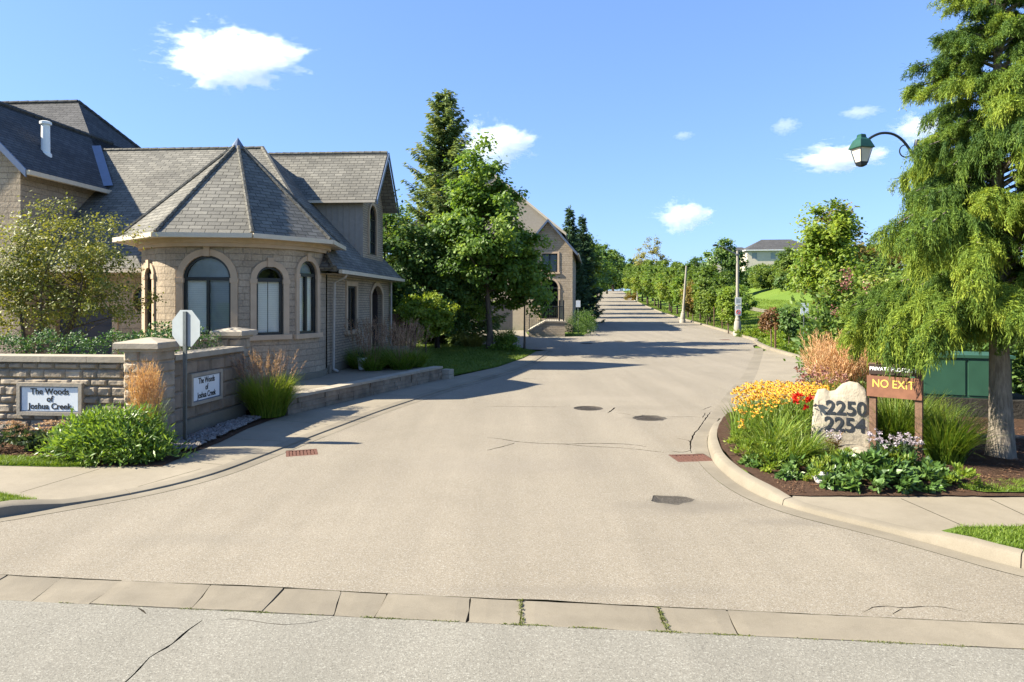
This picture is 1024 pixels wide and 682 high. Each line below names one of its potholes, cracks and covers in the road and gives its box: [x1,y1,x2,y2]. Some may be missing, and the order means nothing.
crack [125,608,333,682]
crack [490,406,712,452]
crack [864,606,965,614]
drain grate [669,454,713,466]
drain grate [286,449,318,457]
